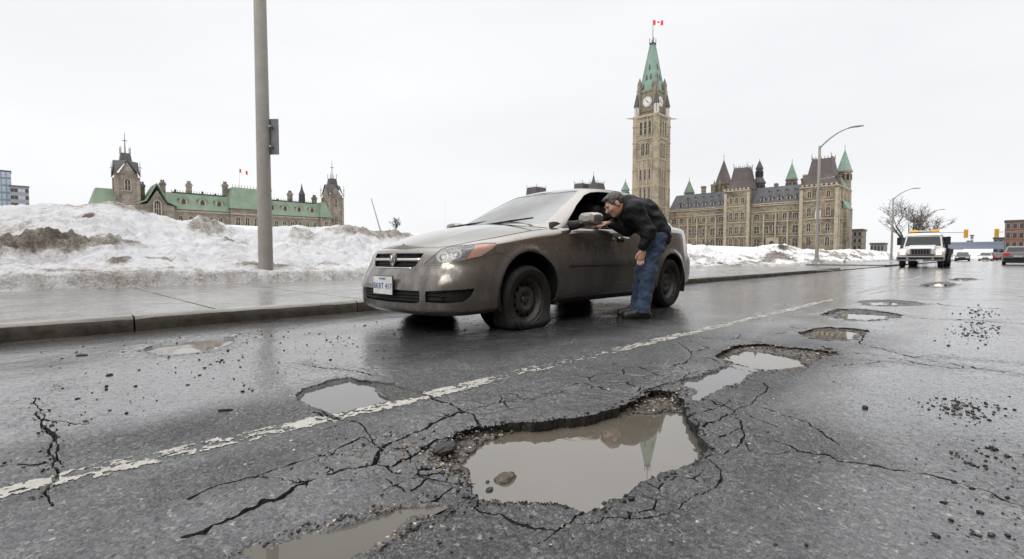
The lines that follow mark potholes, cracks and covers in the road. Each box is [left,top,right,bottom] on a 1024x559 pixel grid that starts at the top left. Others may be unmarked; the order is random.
pothole [228,501,459,559]
pothole [798,327,869,341]
pothole [295,377,424,416]
pothole [675,364,759,403]
pothole [821,308,905,321]
crack [159,380,1024,545]
crack [0,386,88,507]
crack [573,313,807,397]
pothole [715,344,835,373]
pothole [136,336,239,357]
pothole [439,390,709,514]
